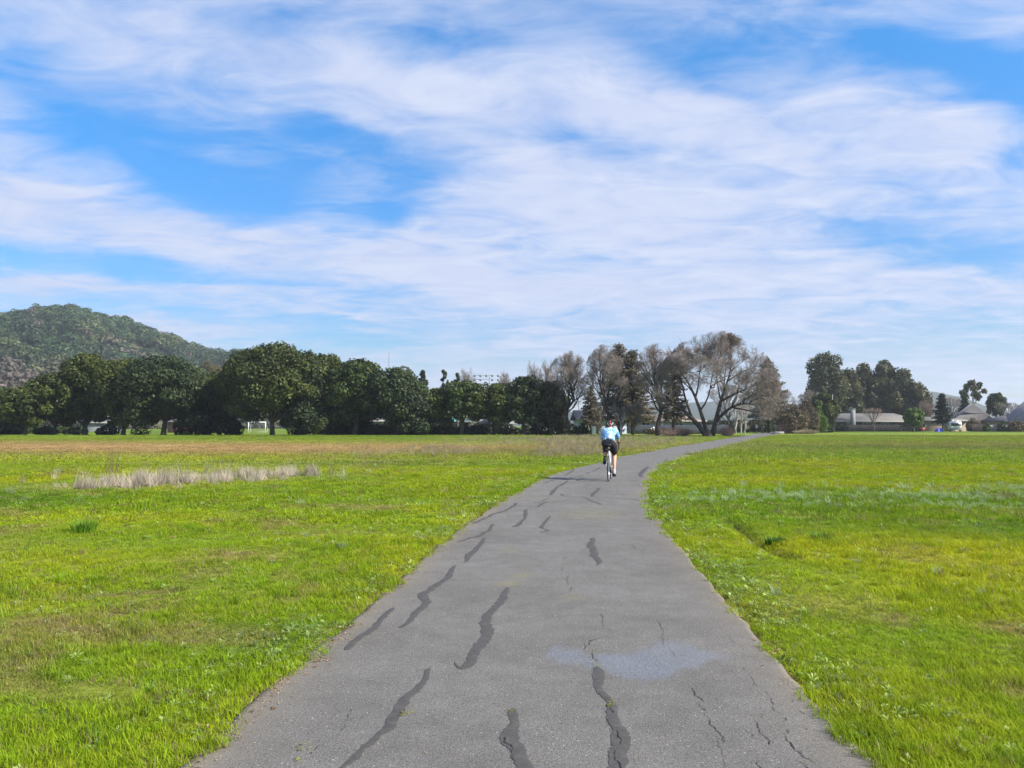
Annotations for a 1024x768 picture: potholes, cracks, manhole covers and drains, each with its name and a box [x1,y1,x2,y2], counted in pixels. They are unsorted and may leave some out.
crack [692,688,726,768]
crack [742,667,810,768]
